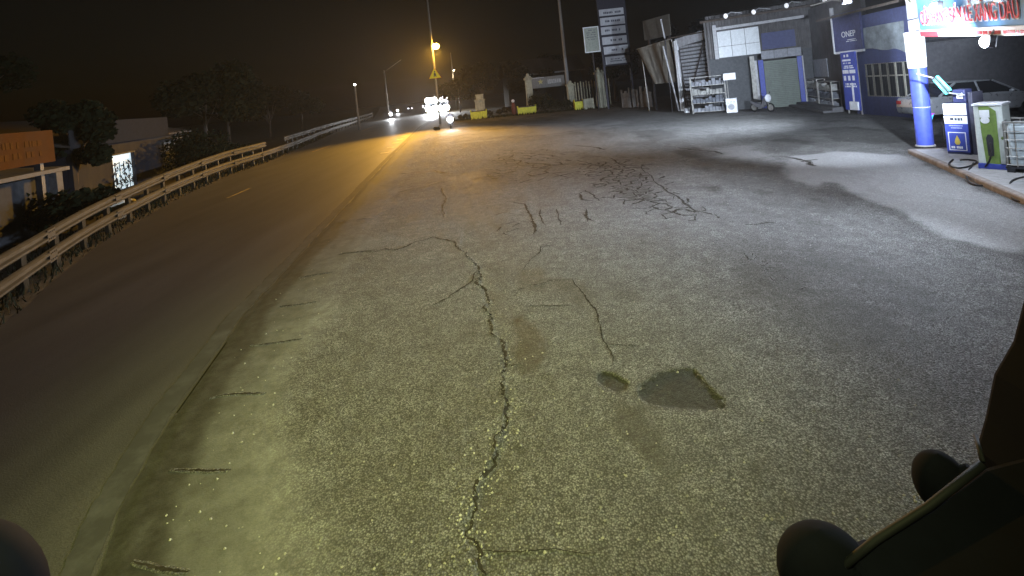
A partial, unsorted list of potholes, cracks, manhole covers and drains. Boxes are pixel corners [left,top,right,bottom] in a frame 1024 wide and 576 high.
crack [338,145,724,576]
crack [786,156,818,166]
pothole [636,368,725,411]
pothole [597,372,629,393]
